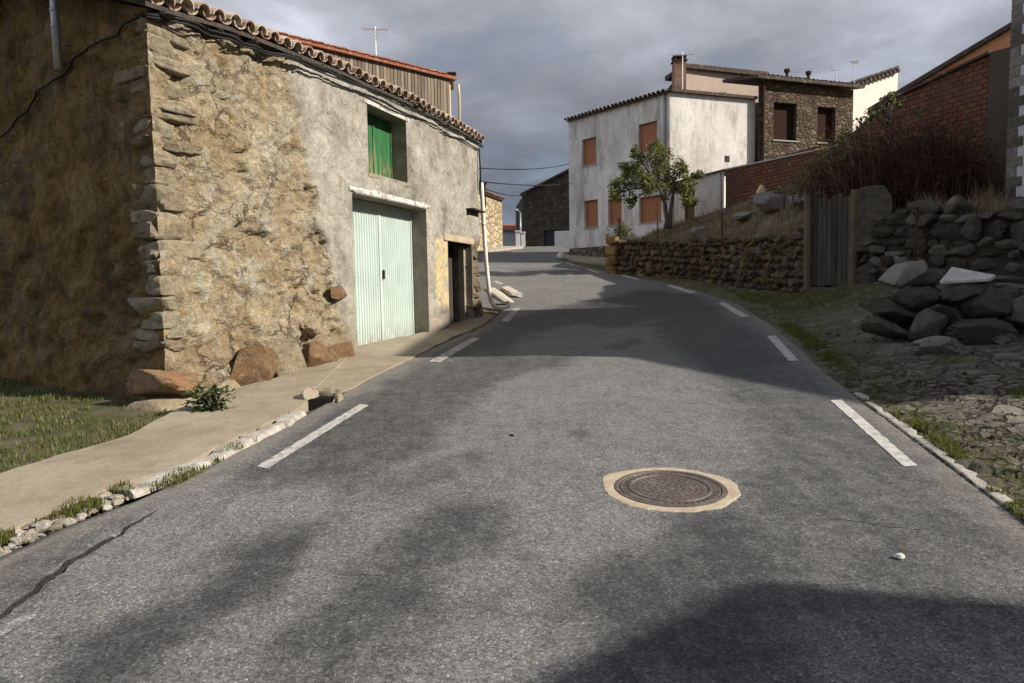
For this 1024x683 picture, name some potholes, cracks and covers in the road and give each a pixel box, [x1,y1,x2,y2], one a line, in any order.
crack [836,519,935,530]
crack [0,510,158,620]
manhole cover [602,467,741,513]
